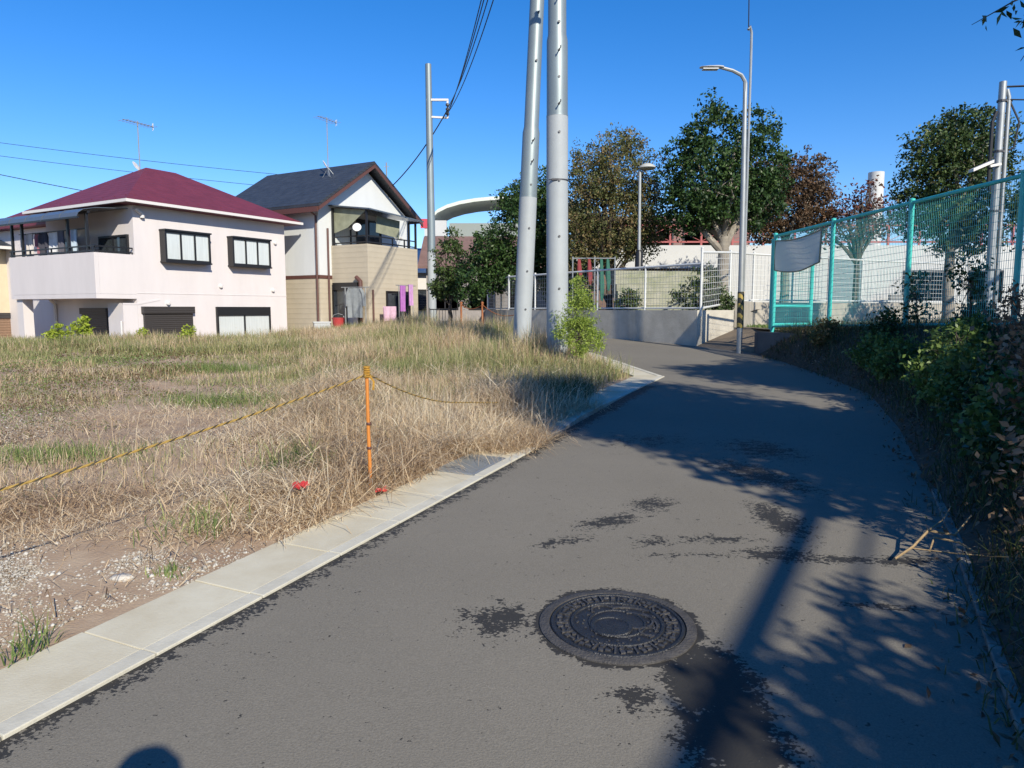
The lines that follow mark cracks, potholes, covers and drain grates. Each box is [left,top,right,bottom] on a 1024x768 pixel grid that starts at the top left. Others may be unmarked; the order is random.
manhole cover [539,590,697,666]
